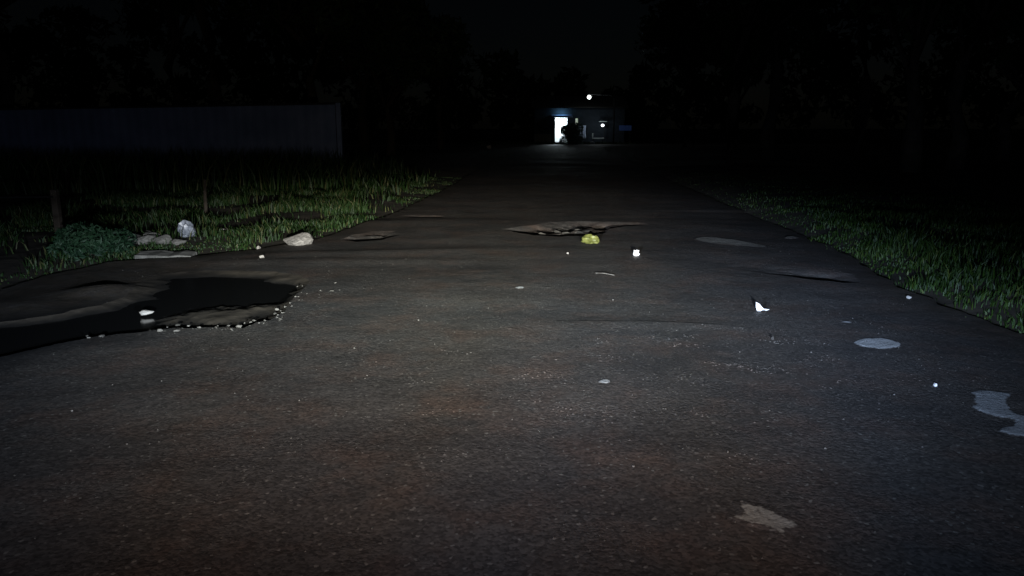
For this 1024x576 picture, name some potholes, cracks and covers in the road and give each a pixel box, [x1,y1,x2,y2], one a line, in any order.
pothole [0,271,310,357]
pothole [501,221,650,237]
crack [552,320,750,328]
